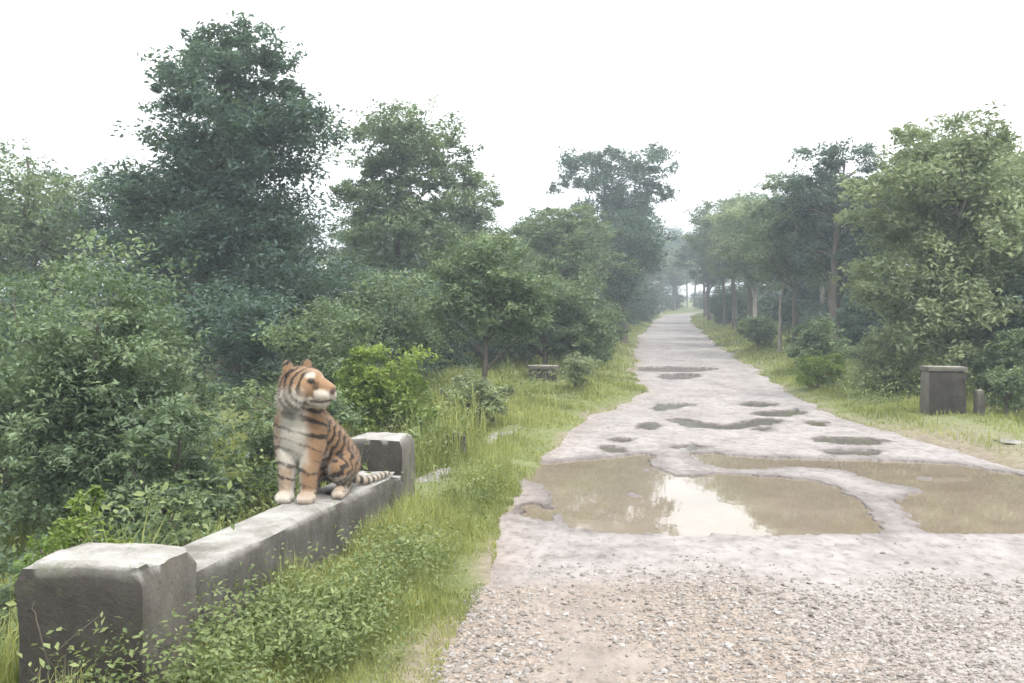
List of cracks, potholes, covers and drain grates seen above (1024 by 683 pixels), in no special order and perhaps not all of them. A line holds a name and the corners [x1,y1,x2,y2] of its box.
pothole [599,445,628,453]
pothole [667,417,784,430]
pothole [689,451,1024,534]
pothole [824,448,881,456]
pothole [652,403,697,411]
pothole [637,422,663,430]
pothole [812,436,890,445]
pothole [525,453,886,536]
pothole [519,502,557,521]
pothole [751,408,808,417]
